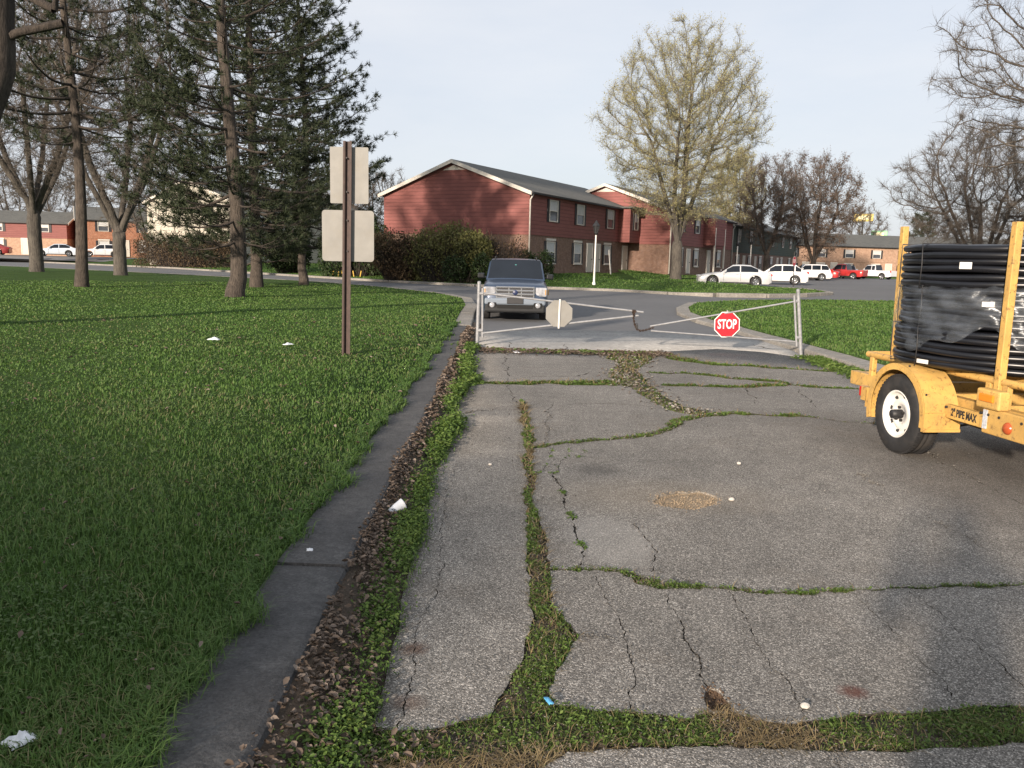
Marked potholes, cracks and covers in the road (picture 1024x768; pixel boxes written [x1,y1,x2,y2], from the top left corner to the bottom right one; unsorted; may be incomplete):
crack [490,342,589,402]
crack [365,355,1024,768]
pothole [701,682,741,714]
